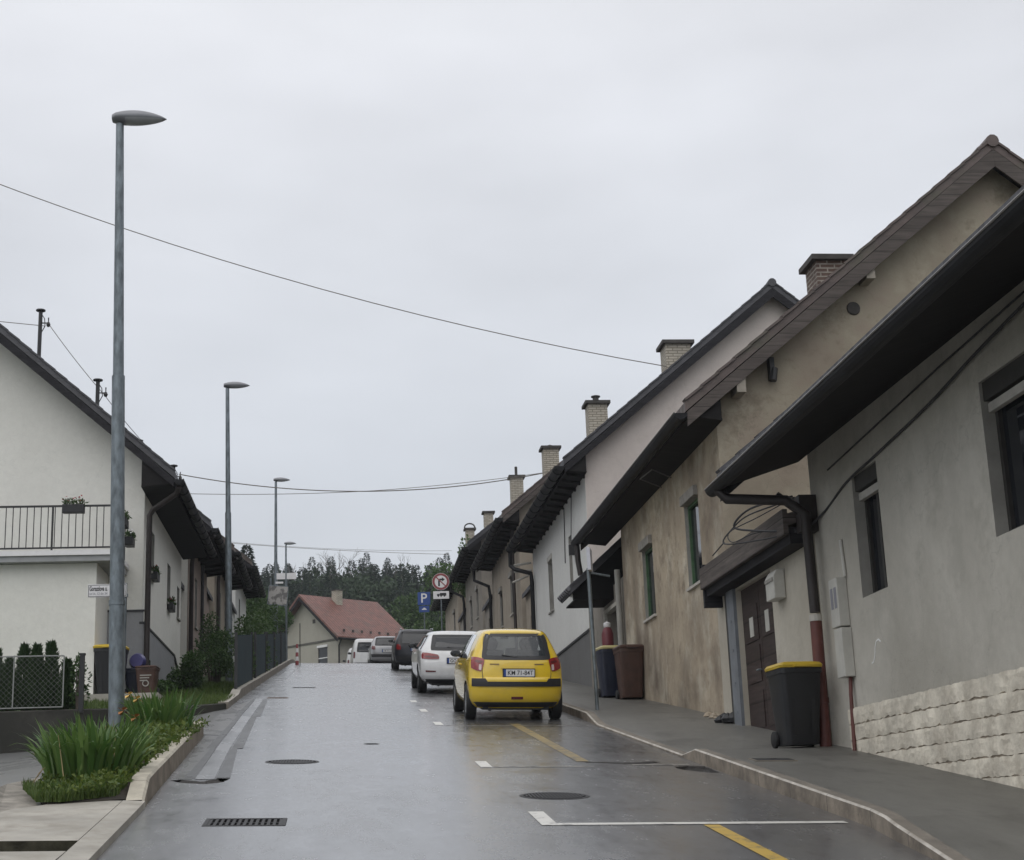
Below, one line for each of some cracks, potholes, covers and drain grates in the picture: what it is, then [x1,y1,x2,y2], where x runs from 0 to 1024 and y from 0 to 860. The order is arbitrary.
drain grate [202,818,287,826]
manhole cover [520,792,590,800]
